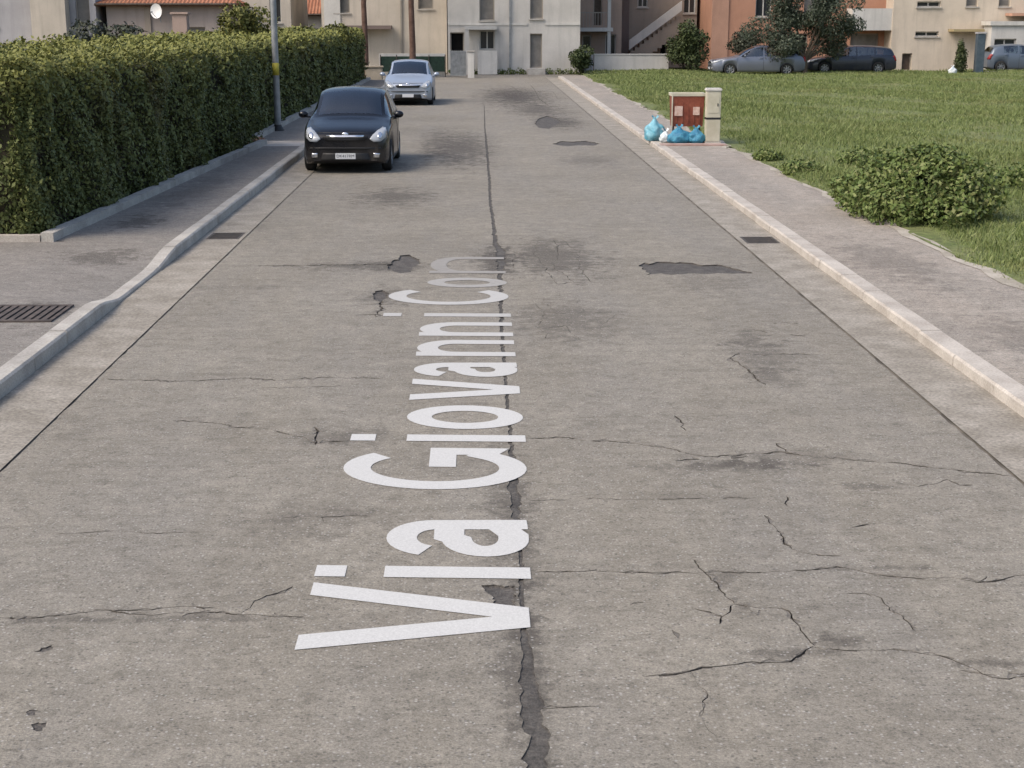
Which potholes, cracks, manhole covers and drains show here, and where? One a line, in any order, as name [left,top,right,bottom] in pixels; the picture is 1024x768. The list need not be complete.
pothole [639,262,752,275]
crack [532,497,1024,739]
crack [0,586,303,622]
pothole [373,290,389,302]
crack [176,420,346,445]
crack [512,239,616,342]
crack [727,322,820,385]
pothole [481,584,516,606]
crack [537,415,1014,487]
pothole [387,255,420,273]
drain grate [0,304,74,323]
crack [109,377,380,389]
